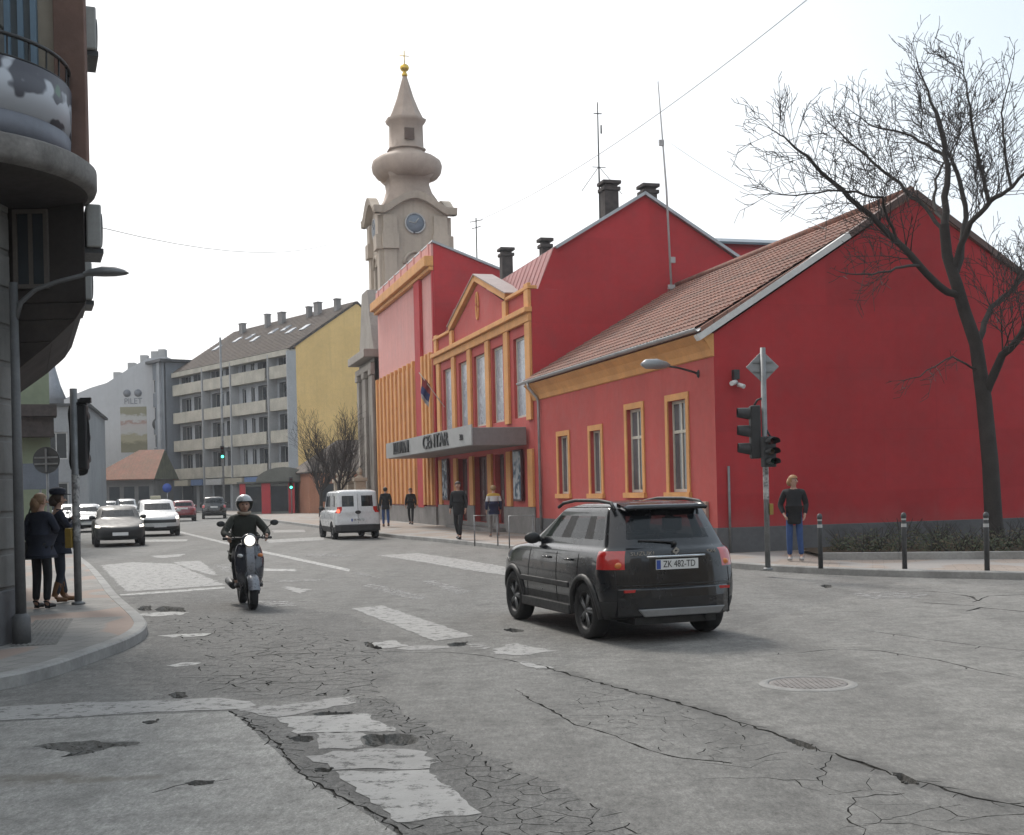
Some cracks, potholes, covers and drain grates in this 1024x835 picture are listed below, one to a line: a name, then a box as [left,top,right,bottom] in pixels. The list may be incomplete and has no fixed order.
crack [150,616,432,746]
manhole cover [759,676,858,692]
crack [515,686,1023,835]
pothole [33,740,140,757]
pothole [363,733,422,747]
crack [914,591,1024,612]
crack [401,730,641,835]
